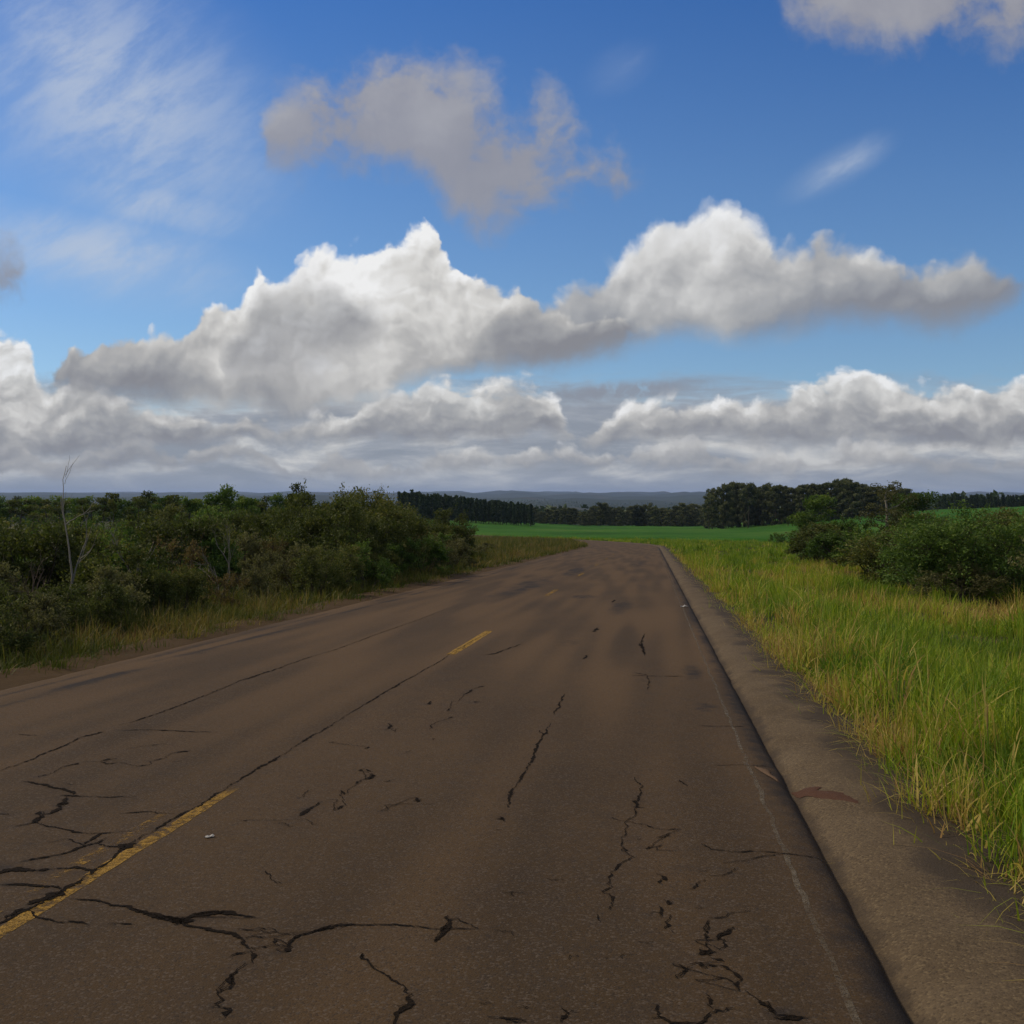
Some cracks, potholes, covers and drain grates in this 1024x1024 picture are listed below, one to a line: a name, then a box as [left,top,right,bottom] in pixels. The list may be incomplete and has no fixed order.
crack [0,609,489,1024]
crack [496,696,563,830]
crack [547,777,807,1024]
